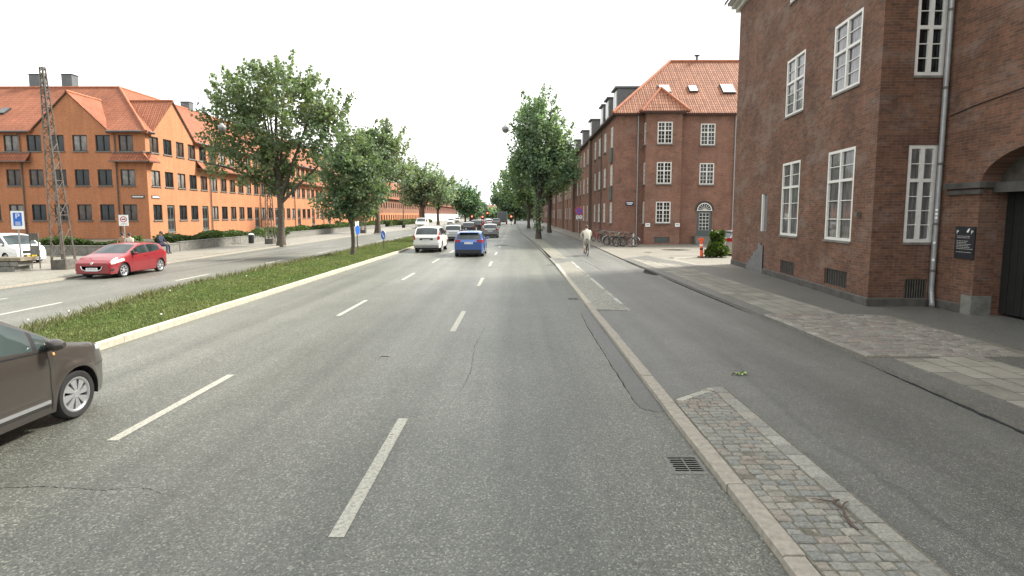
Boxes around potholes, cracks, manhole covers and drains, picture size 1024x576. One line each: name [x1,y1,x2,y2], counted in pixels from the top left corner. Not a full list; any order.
crack [5,486,164,495]
crack [581,314,650,411]
drain grate [662,456,709,474]
